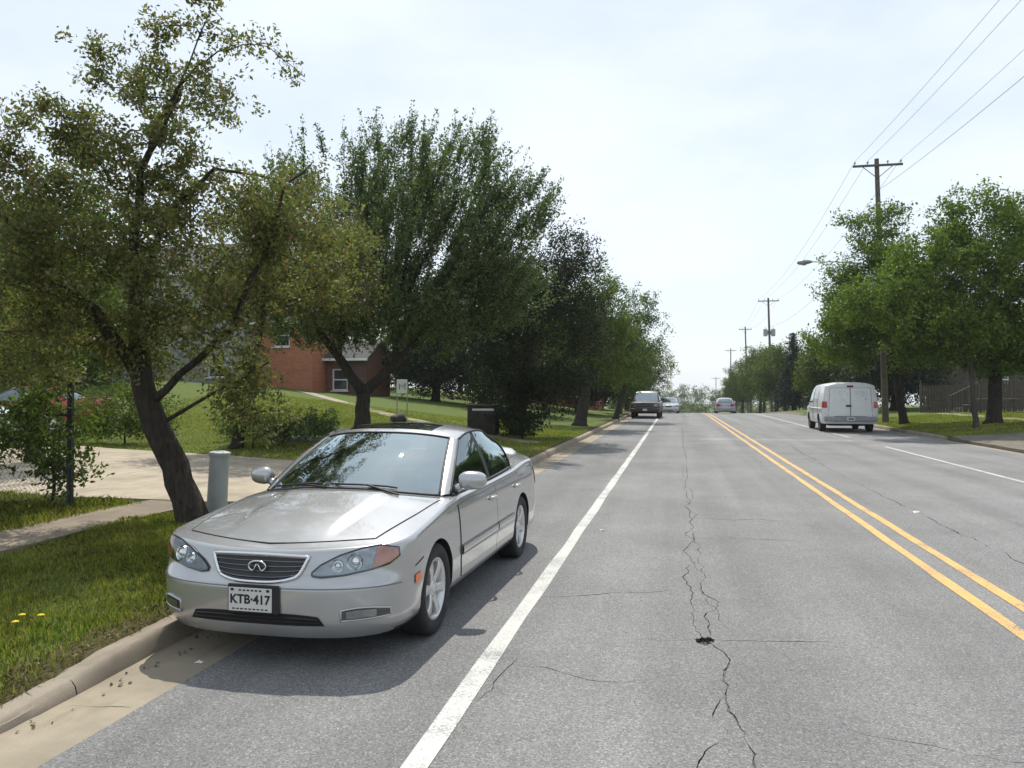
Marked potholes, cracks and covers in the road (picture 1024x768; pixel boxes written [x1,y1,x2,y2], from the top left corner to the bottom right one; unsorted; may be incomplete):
crack [567,438,806,768]
pothole [695,637,715,646]
crack [476,656,639,702]
